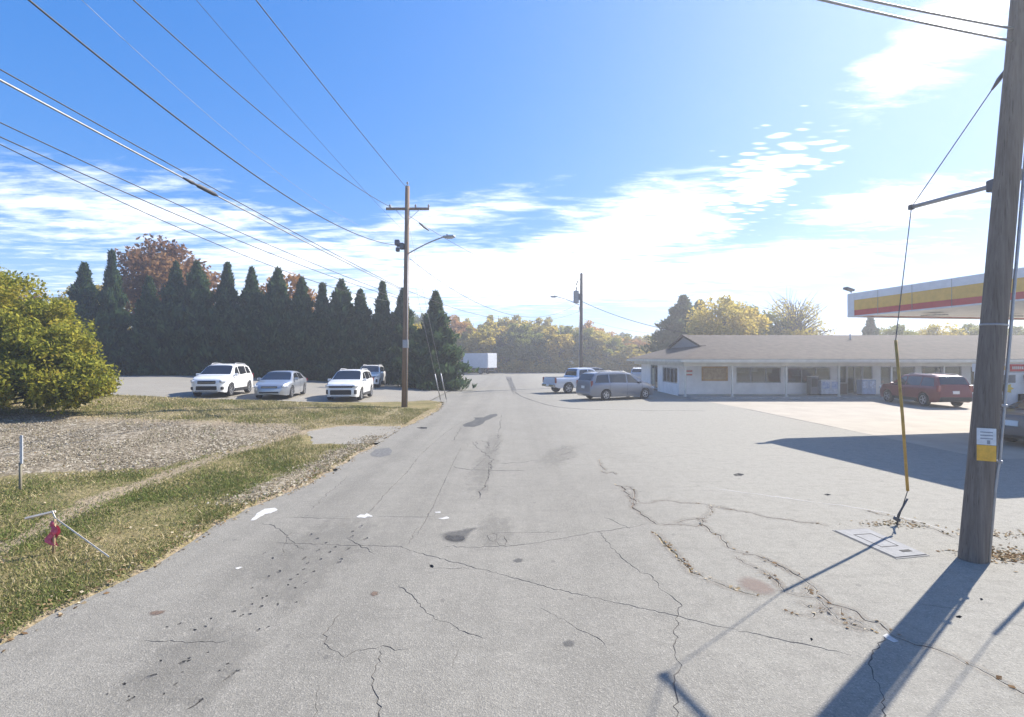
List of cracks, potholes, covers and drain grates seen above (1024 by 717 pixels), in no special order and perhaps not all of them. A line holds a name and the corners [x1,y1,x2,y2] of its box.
crack [262,461,1024,717]
utility cover [832,528,930,559]
crack [454,415,532,499]
